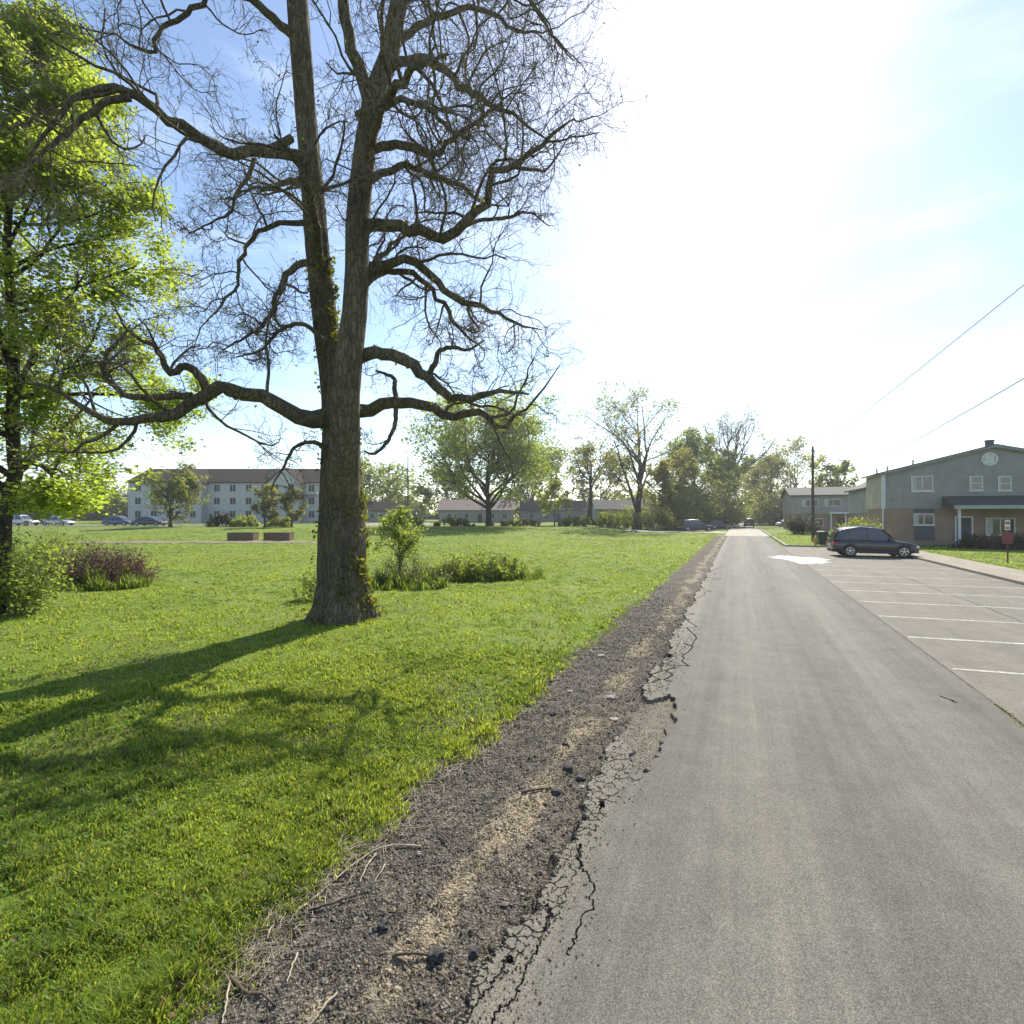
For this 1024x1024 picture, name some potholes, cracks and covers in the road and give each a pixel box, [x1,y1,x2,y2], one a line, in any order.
crack [462,739,643,1024]
crack [641,567,725,695]
